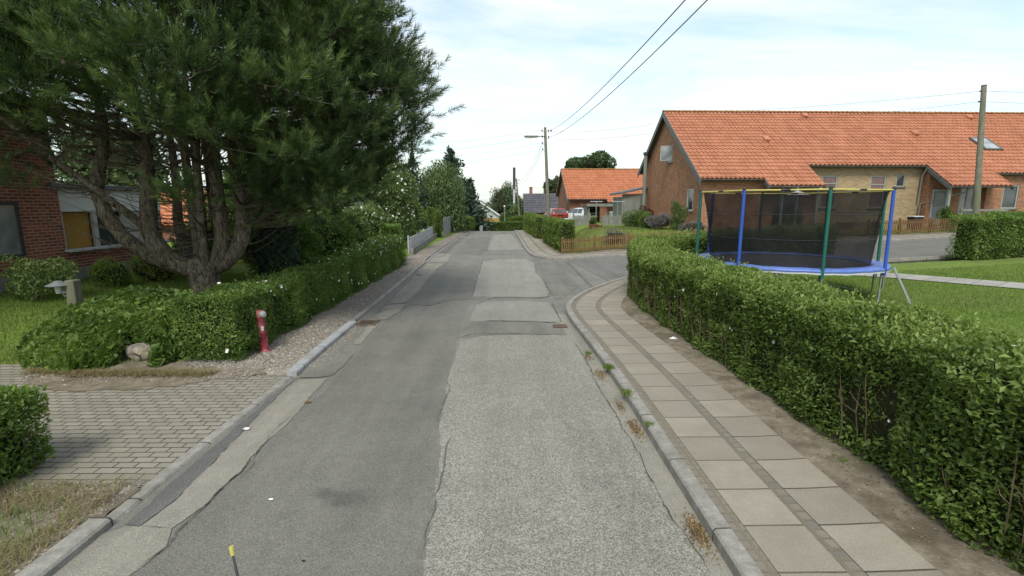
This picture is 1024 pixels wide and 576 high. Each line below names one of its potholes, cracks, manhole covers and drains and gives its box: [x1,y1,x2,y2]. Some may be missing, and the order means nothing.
crack [381,268,712,574]
crack [130,410,296,568]
